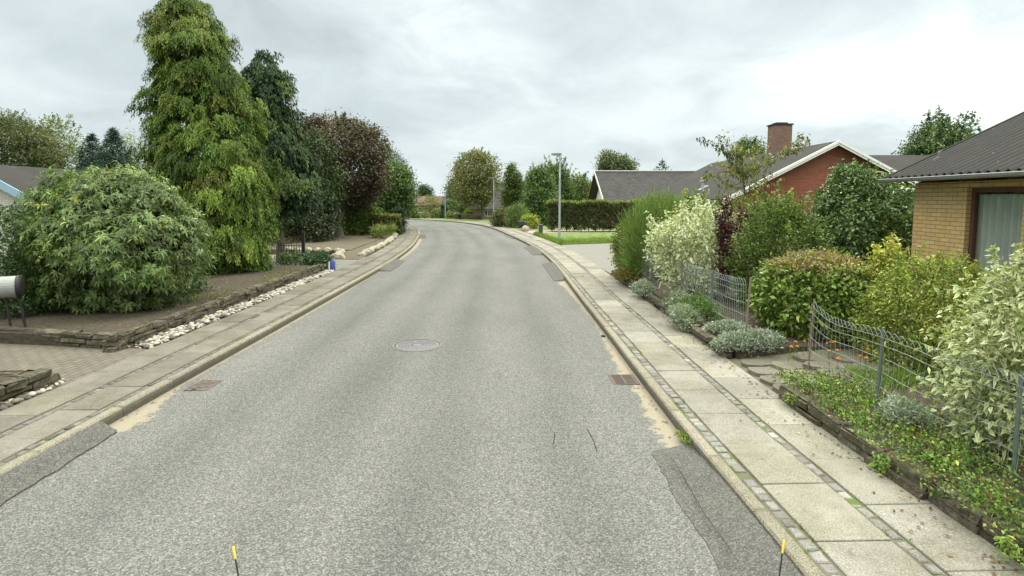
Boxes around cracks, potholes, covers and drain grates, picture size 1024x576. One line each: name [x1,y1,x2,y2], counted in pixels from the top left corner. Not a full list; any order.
drain grate [183,380,223,391]
manhole cover [392,339,442,352]
drain grate [607,374,640,385]
